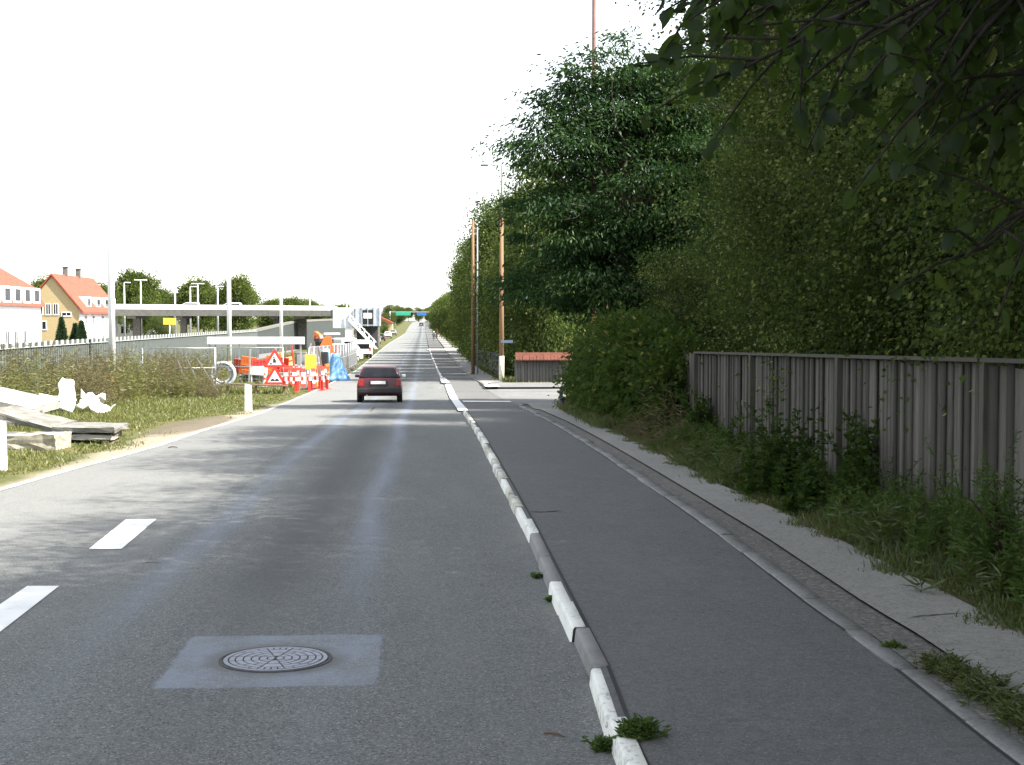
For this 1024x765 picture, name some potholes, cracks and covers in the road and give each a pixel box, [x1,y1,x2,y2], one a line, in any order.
manhole cover [218,646,332,673]
